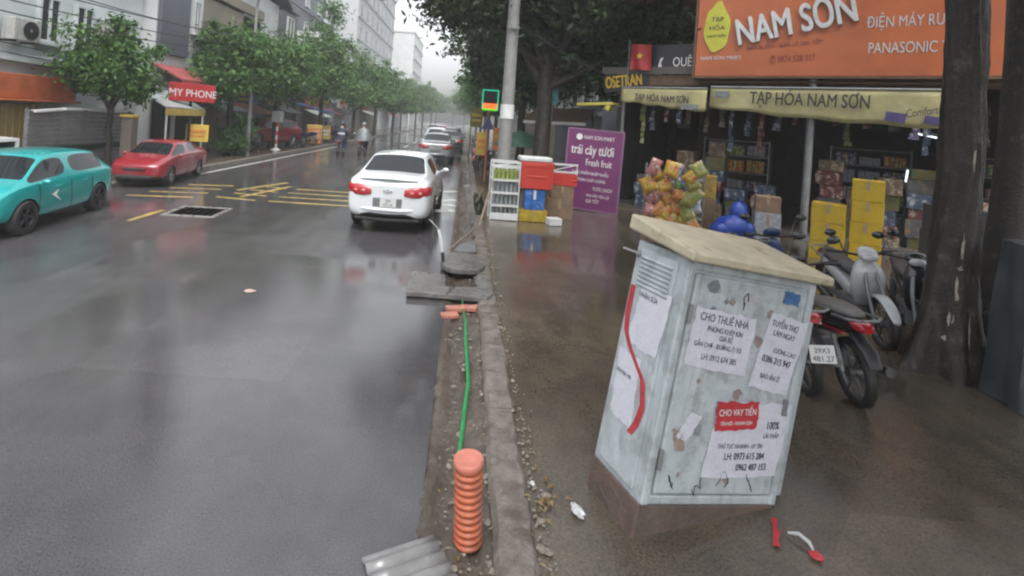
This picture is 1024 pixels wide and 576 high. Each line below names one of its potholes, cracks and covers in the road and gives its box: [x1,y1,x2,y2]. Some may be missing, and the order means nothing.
manhole cover [440,252,485,275]
